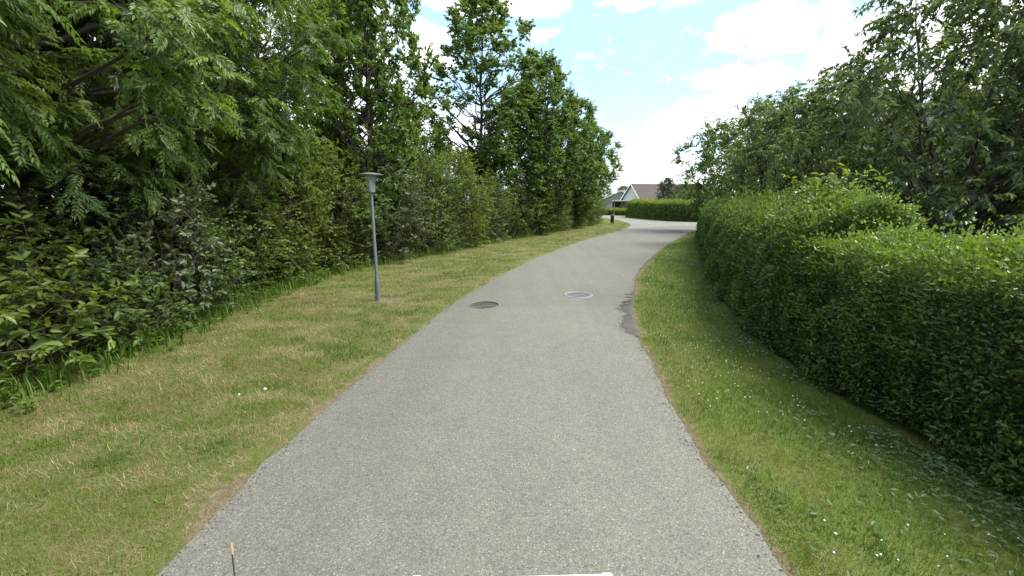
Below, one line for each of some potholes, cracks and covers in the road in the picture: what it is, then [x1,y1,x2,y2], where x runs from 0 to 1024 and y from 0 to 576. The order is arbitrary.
manhole cover [468,301,500,309]
